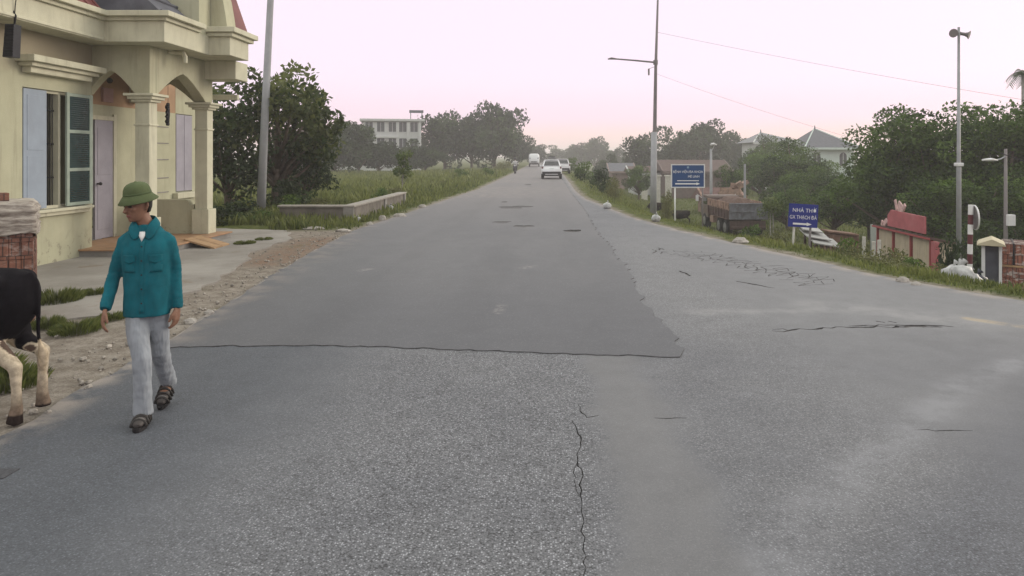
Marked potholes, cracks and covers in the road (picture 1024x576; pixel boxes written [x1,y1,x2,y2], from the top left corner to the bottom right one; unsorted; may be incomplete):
crack [773,321,952,332]
crack [572,405,599,576]
crack [652,248,834,288]
